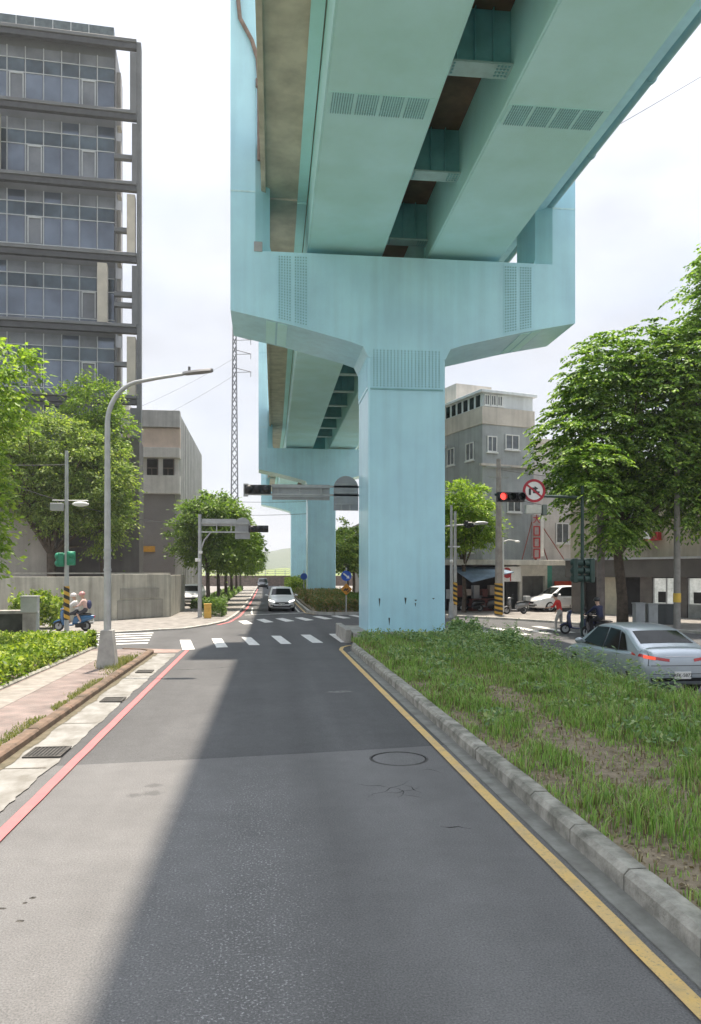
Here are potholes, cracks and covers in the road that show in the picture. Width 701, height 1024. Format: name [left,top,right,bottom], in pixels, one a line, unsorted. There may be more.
manhole cover [369,752,428,766]
drain grate [22,746,72,758]
